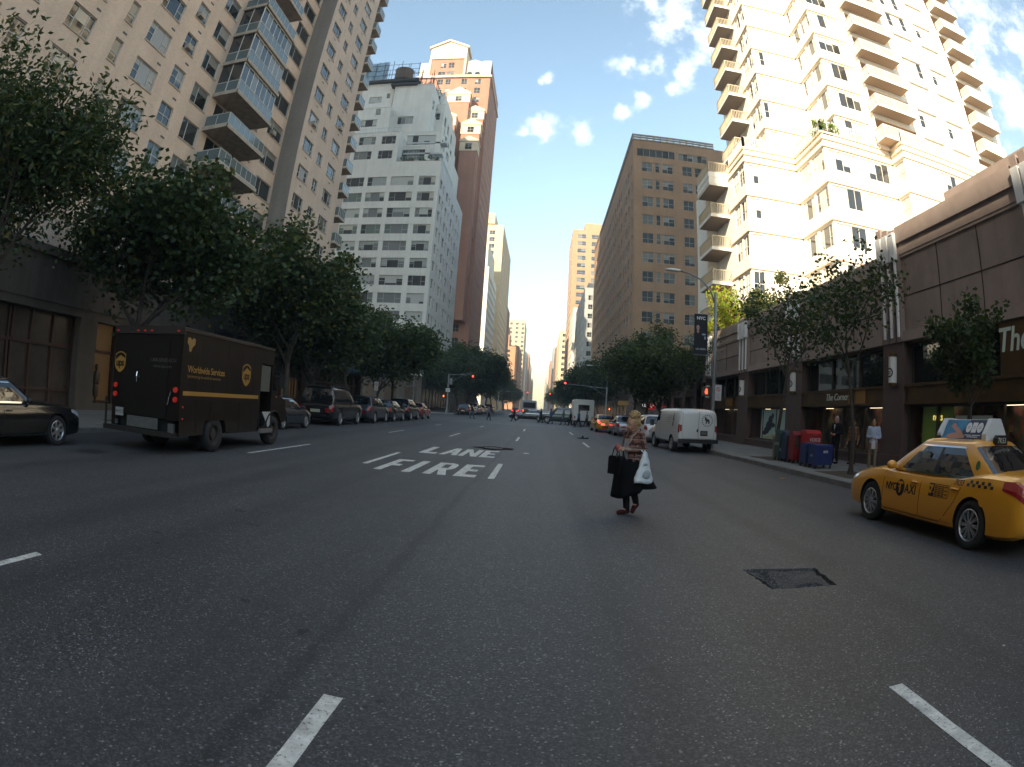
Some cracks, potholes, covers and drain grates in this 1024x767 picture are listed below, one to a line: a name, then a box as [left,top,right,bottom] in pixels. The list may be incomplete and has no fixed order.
pothole [726,562,856,596]
